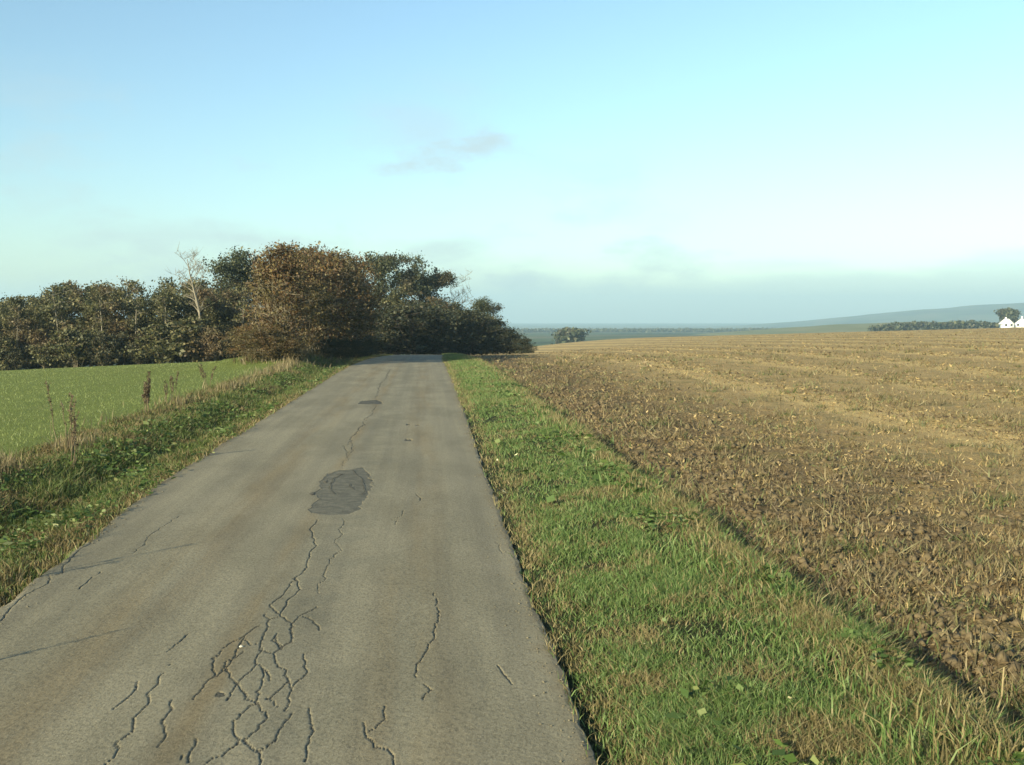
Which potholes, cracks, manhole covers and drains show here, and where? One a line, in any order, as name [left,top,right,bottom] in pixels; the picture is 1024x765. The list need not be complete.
crack [342,369,391,466]
crack [193,522,320,765]
crack [105,635,198,765]
crack [363,706,394,764]
crack [414,594,440,700]
